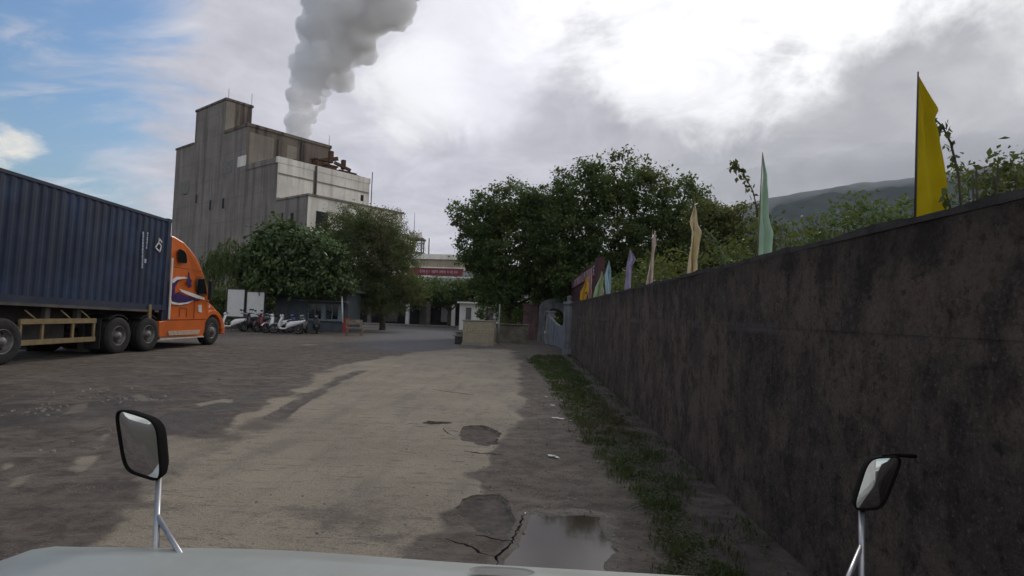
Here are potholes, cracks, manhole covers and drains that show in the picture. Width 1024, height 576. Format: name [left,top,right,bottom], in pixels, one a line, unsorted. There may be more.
pothole [459,425,501,446]
pothole [455,494,516,536]
crack [444,513,525,565]
